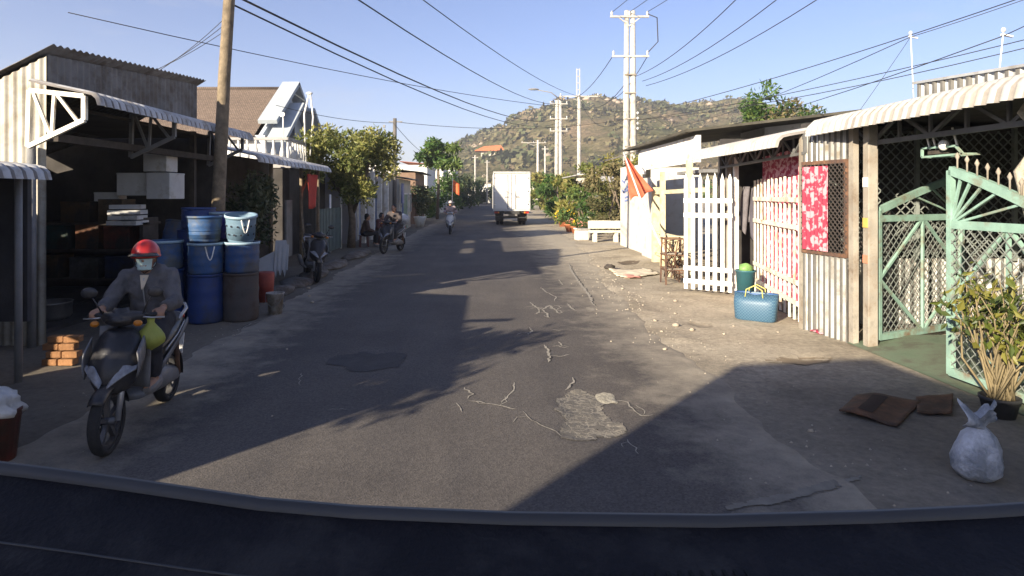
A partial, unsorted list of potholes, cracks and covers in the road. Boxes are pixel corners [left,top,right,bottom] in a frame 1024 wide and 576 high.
crack [617,400,649,416]
crack [456,383,577,440]
crack [517,249,597,390]
